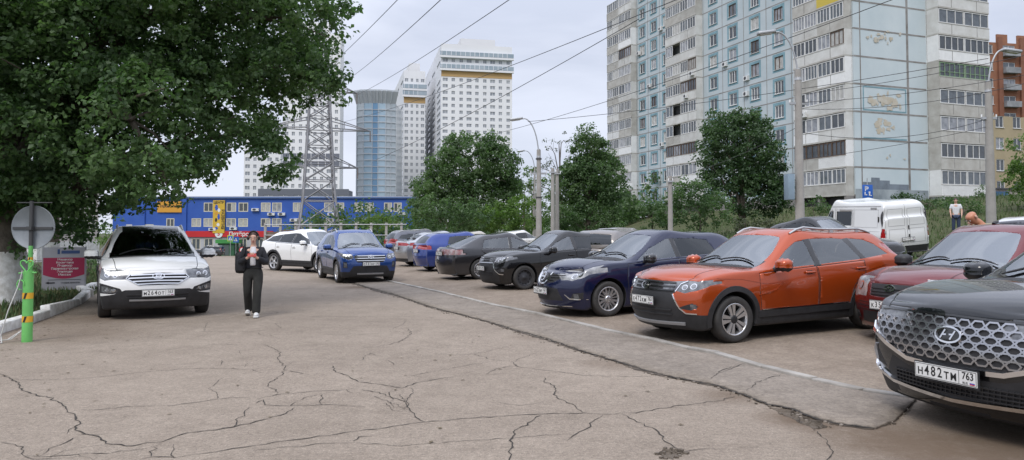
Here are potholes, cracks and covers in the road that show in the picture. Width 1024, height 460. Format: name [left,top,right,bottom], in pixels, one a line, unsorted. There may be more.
crack [3,284,916,460]
pothole [768,405,832,430]
pothole [655,446,689,460]
